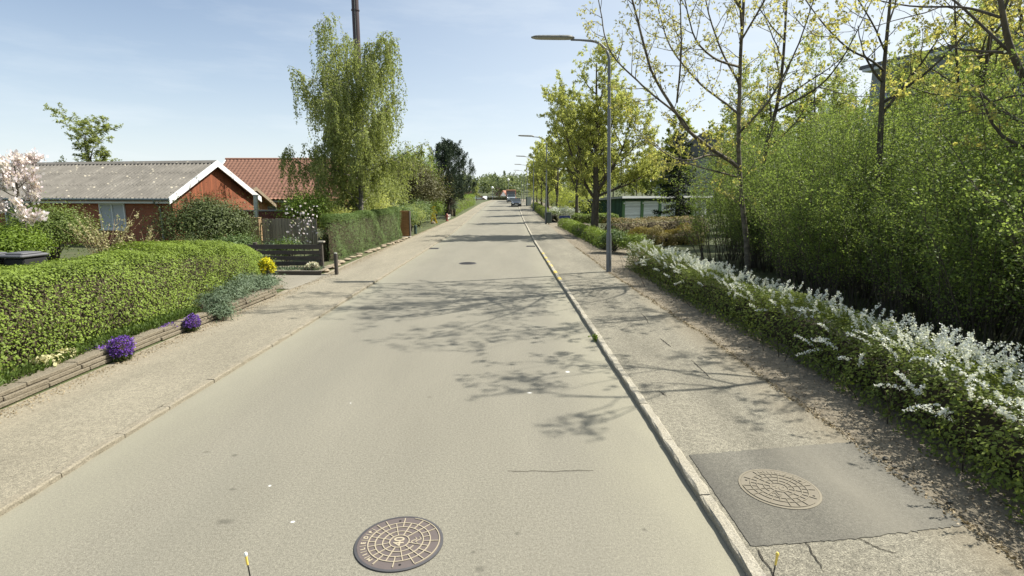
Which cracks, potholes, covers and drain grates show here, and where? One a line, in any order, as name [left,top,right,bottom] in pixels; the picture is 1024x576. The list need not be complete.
manhole cover [738,469,822,510]
manhole cover [354,516,443,573]
